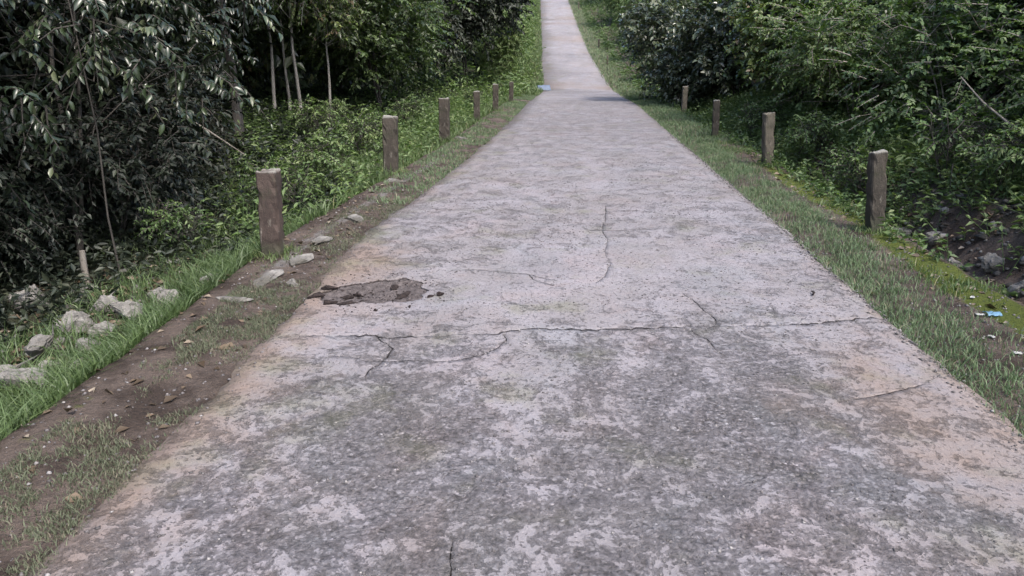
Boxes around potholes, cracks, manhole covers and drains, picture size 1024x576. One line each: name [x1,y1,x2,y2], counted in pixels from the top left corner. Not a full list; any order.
pothole [321,277,427,304]
crack [320,296,877,375]
